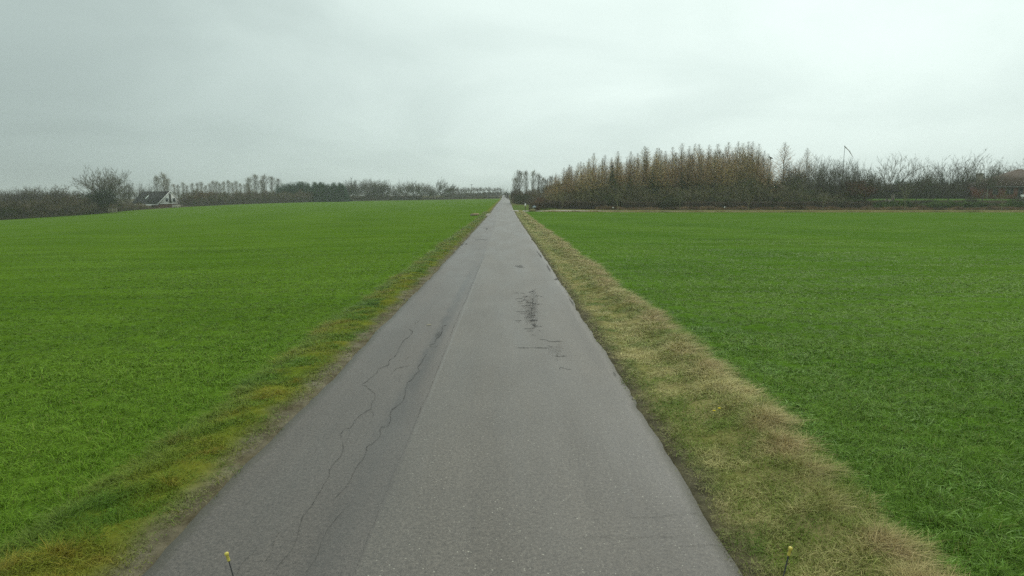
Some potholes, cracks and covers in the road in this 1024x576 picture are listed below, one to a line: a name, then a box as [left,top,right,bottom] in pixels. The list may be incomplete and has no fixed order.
crack [237,329,436,573]
